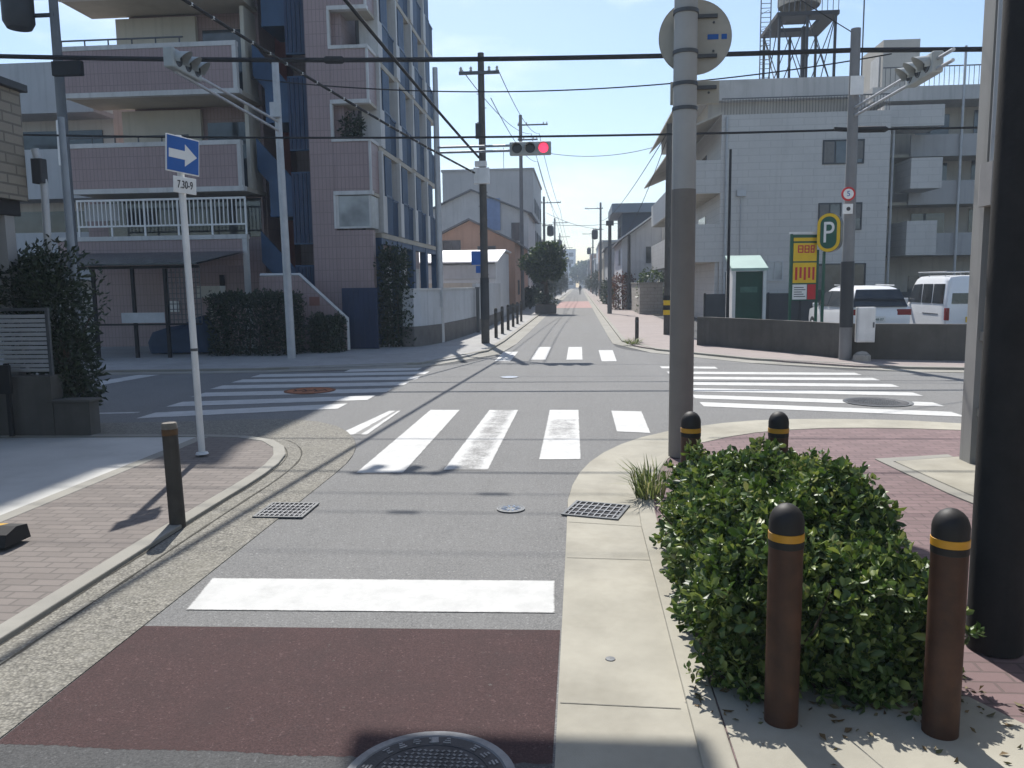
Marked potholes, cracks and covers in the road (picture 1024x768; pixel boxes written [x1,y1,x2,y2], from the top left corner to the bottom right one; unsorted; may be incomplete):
drain grate [561,500,630,520]
manhole cover [348,731,515,768]
manhole cover [843,397,914,407]
utility cover [497,504,525,513]
drain grate [252,502,320,518]
